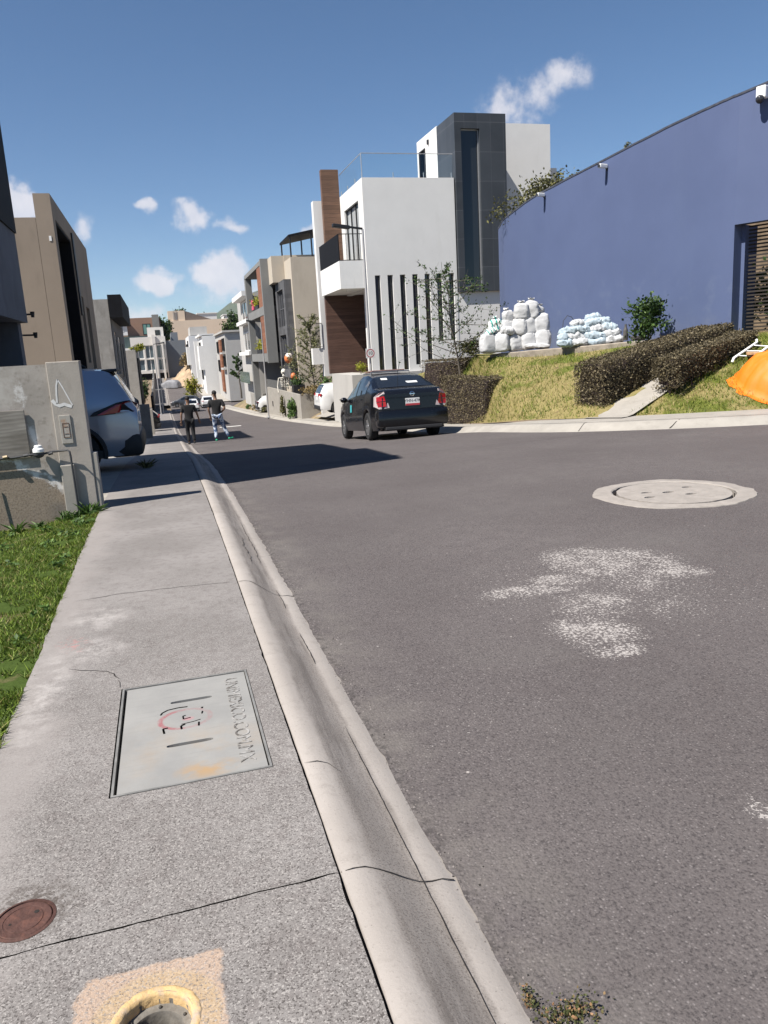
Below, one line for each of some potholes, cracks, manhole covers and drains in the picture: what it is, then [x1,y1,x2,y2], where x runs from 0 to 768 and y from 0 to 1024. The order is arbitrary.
crack [347,731,496,1024]
utility cover [0,899,57,956]
manhole cover [592,479,758,509]
utility cover [109,669,274,799]
